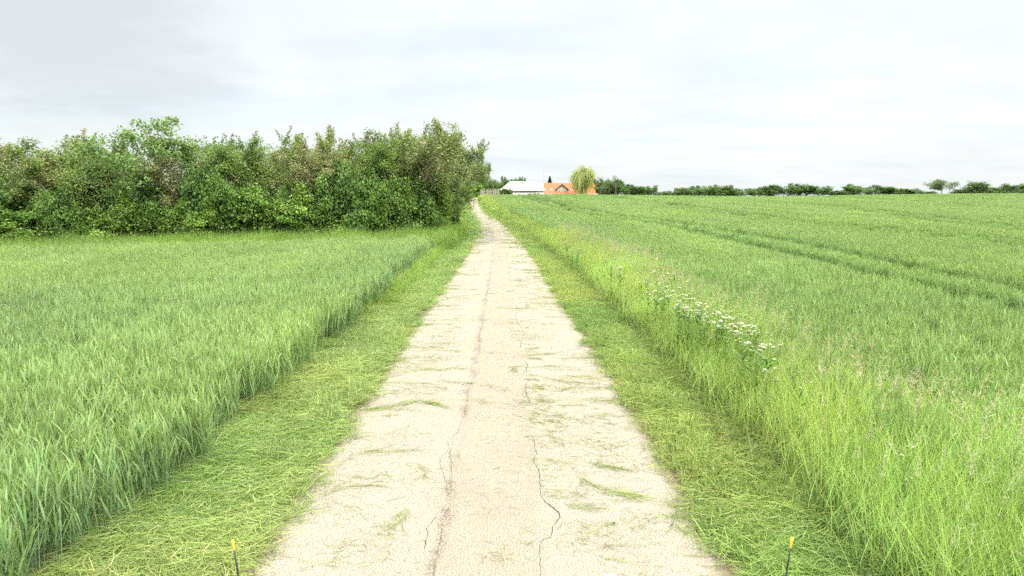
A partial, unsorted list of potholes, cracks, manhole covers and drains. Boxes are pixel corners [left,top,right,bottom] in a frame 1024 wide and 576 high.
crack [424,286,489,576]
crack [532,436,560,576]
